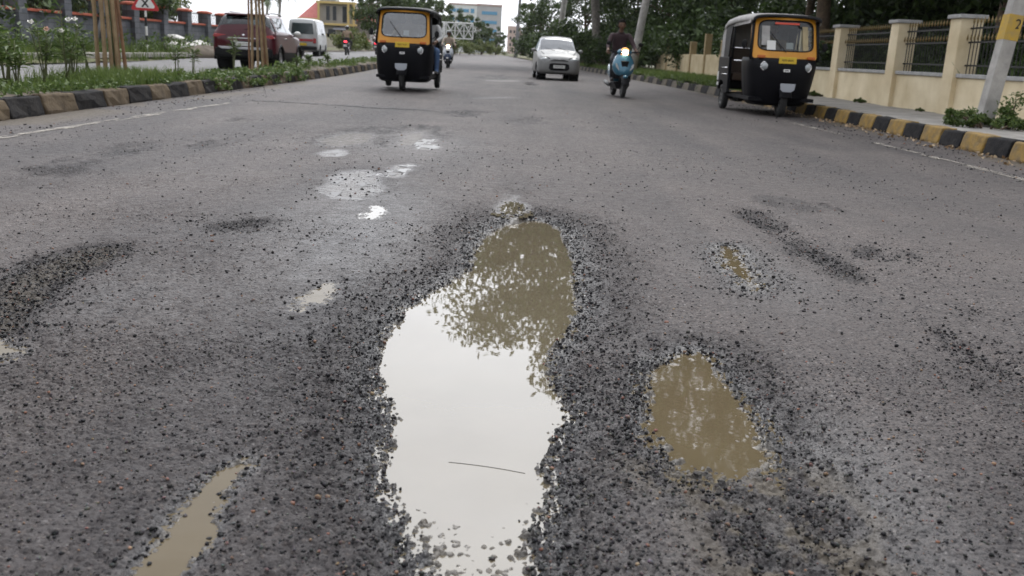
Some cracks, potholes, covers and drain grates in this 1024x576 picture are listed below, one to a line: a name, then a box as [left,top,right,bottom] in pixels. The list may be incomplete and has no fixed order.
pothole [415,139,441,150]
pothole [321,168,396,201]
pothole [320,148,349,157]
pothole [94,441,278,576]
pothole [0,237,158,348]
pothole [491,193,534,219]
pothole [376,162,421,178]
pothole [355,204,394,220]
pothole [316,133,376,147]
pothole [660,234,827,306]
